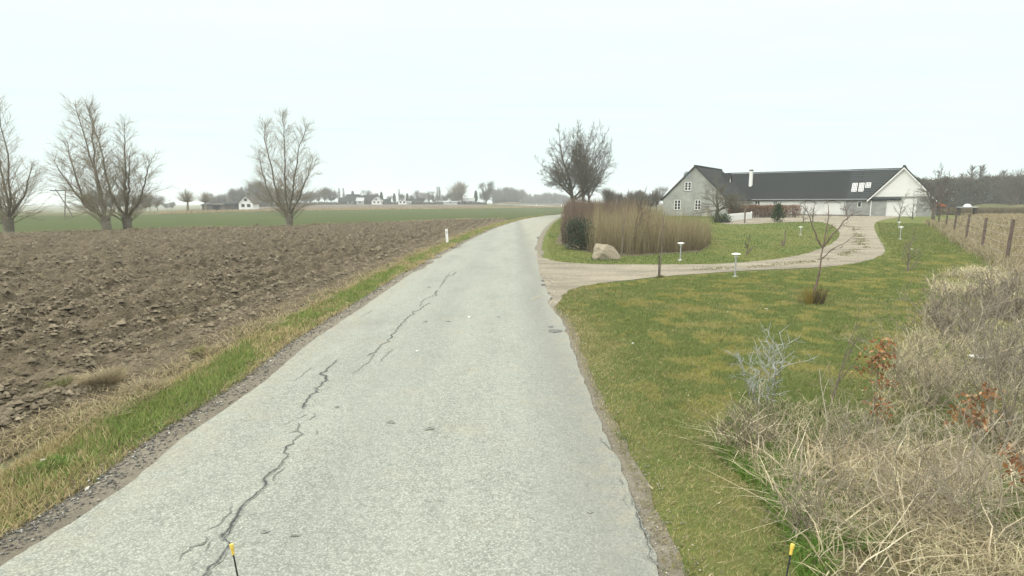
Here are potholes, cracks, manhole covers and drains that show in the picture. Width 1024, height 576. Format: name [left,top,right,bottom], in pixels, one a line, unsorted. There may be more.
crack [620,478,663,568]
crack [178,267,473,576]
